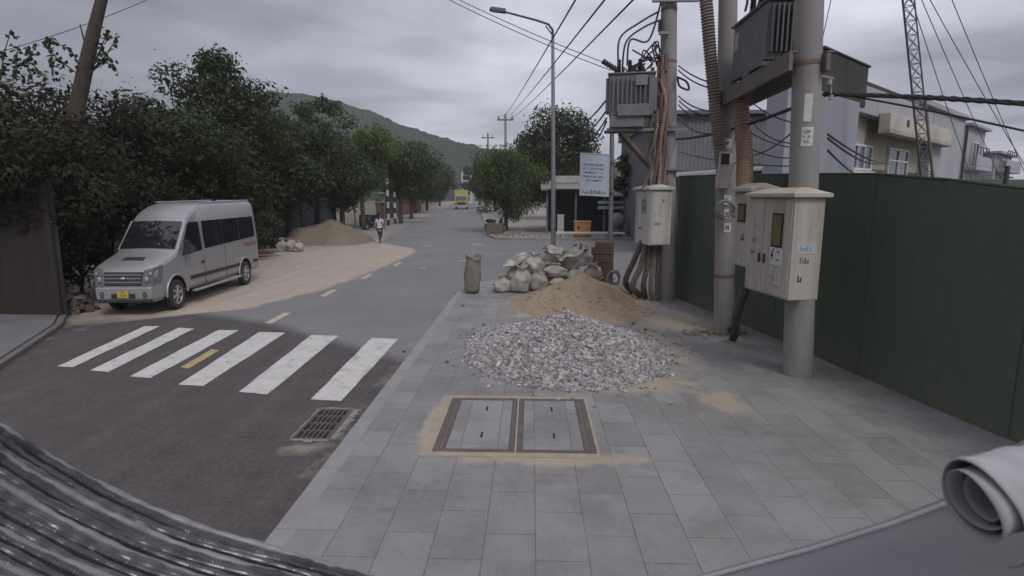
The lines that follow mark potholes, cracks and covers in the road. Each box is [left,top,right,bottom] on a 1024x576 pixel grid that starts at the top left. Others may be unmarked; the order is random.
manhole cover [417,395,601,459]
drain grate [290,407,362,442]
